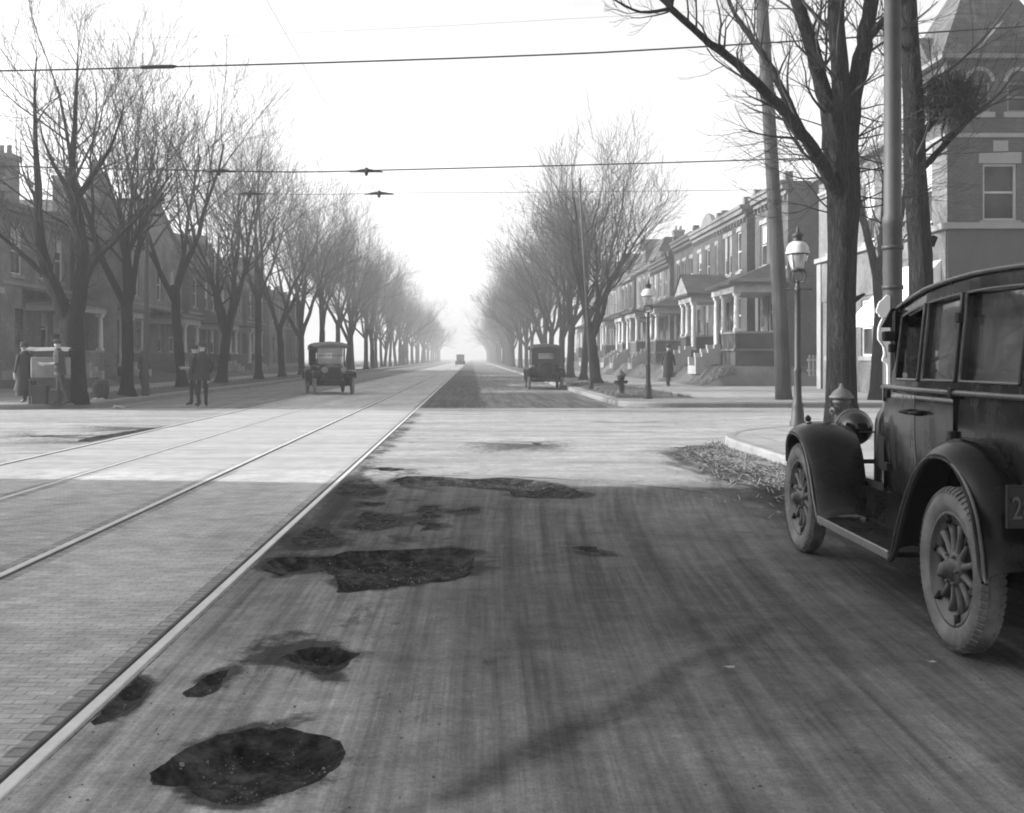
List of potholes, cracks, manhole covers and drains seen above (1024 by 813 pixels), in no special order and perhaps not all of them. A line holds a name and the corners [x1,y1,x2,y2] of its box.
pothole [414,505,443,531]
pothole [390,476,589,499]
pothole [280,647,360,675]
pothole [91,677,151,726]
pothole [149,727,346,805]
pothole [261,548,477,593]
pothole [572,546,617,556]
pothole [182,668,231,697]
pothole [338,511,405,530]
